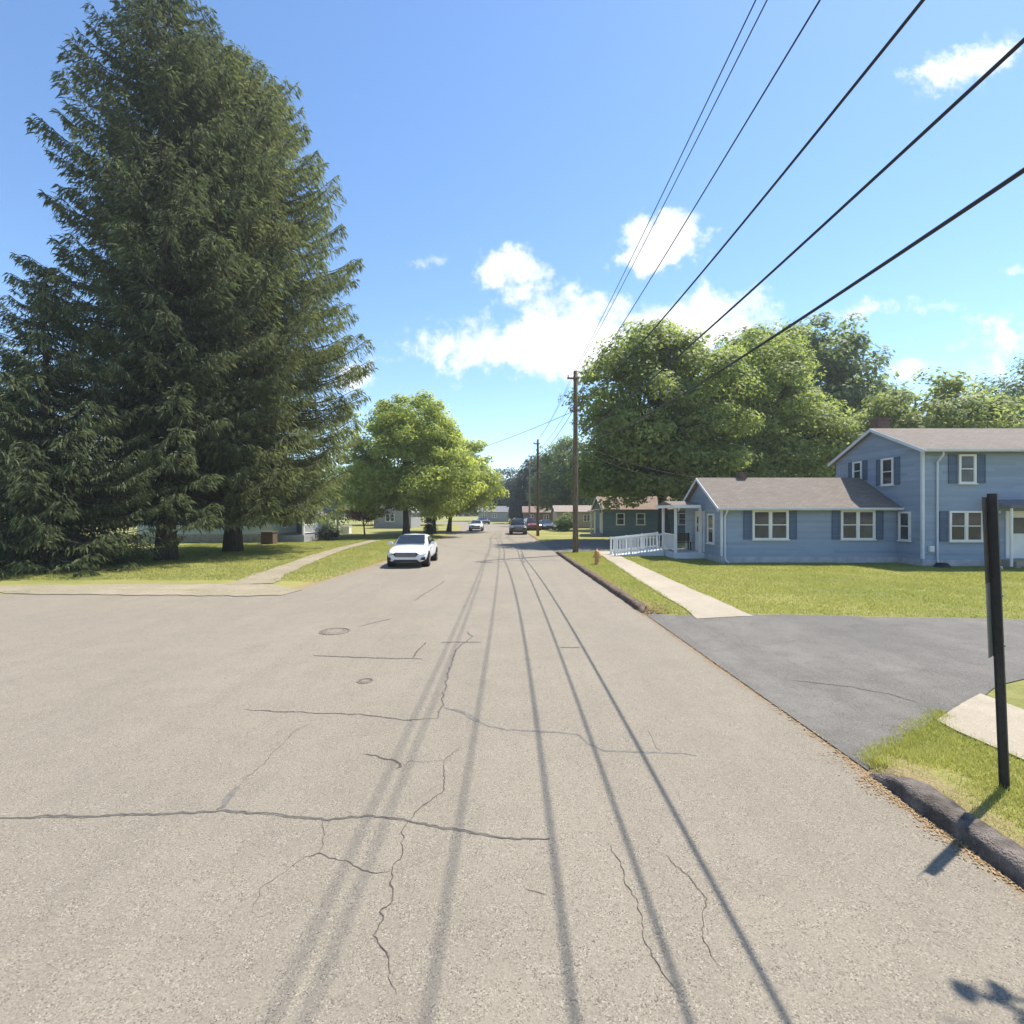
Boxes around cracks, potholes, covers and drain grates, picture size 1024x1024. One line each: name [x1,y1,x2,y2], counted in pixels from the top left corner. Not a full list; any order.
crack [610,845,679,996]
crack [666,854,721,967]
crack [247,633,696,756]
crack [252,753,453,993]
